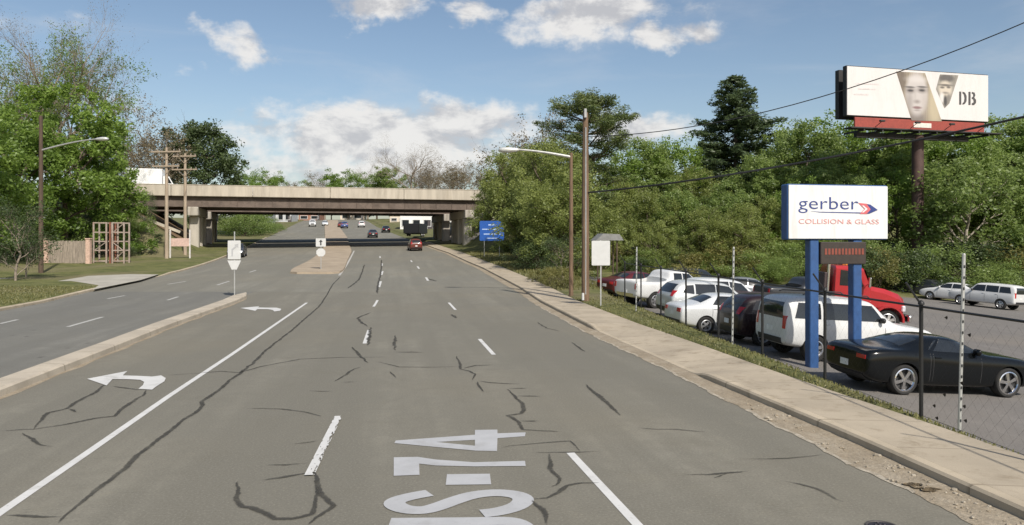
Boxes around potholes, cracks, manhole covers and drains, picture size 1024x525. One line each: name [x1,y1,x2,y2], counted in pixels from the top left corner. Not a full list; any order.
crack [173,357,339,375]
crack [358,312,372,345]
